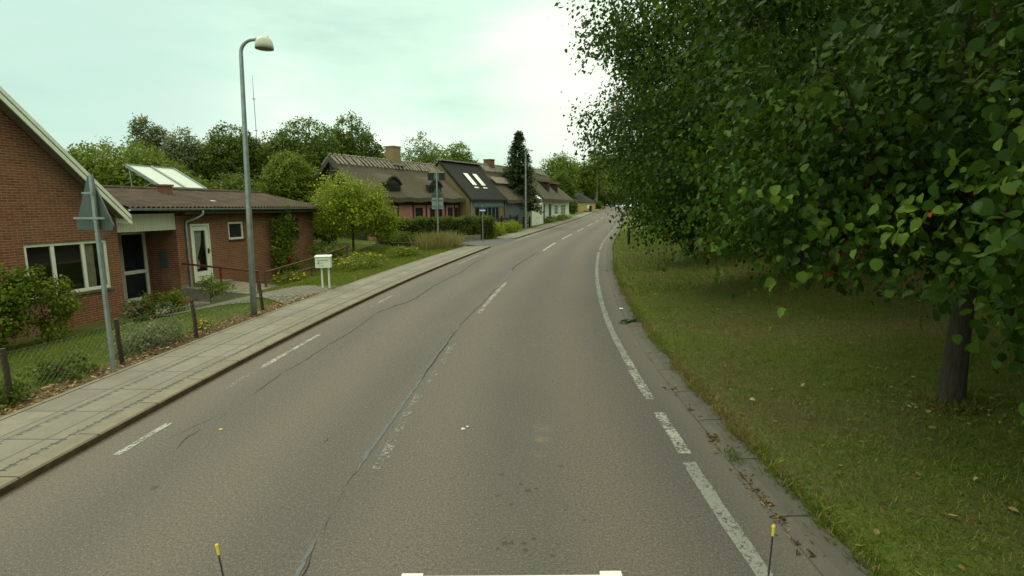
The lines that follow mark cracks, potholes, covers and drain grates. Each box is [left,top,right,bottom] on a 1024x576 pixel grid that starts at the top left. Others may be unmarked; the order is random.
crack [178,253,536,576]
